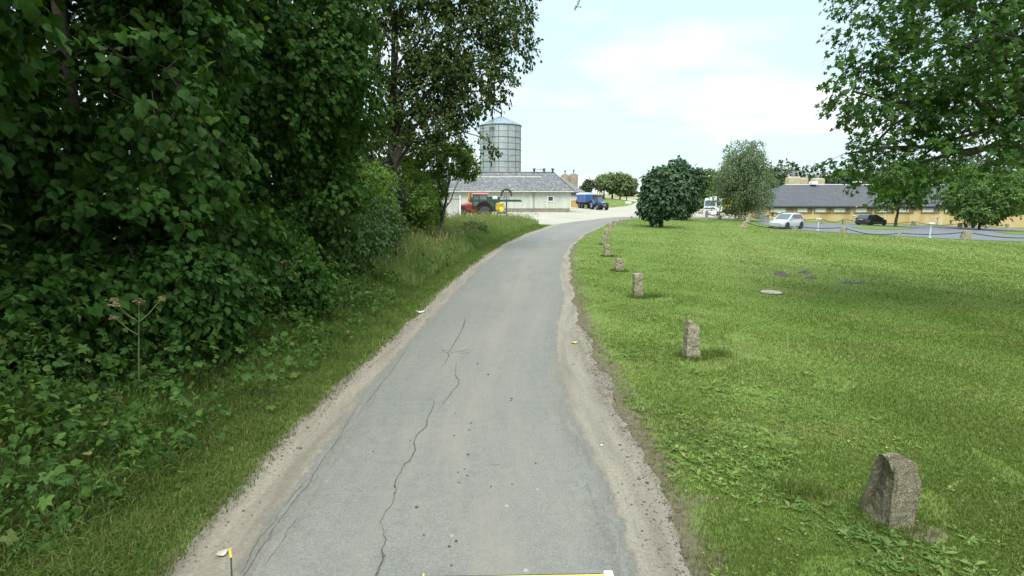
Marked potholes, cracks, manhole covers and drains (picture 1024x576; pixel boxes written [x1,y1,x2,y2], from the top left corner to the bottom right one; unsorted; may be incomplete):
crack [375,322,468,576]
